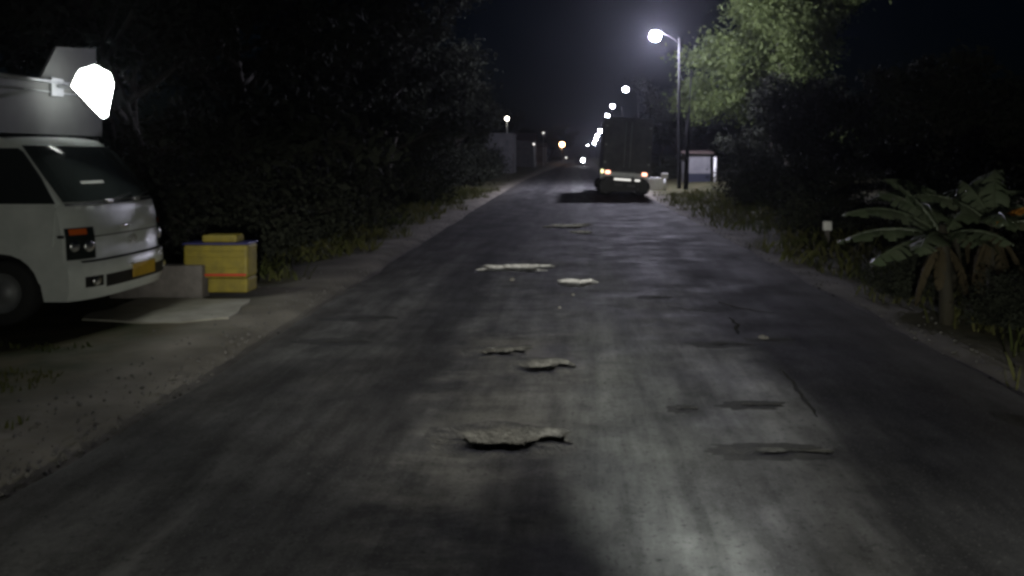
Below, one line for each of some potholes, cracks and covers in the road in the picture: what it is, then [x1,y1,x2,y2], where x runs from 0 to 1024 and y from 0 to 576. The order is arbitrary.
pothole [703,442,842,461]
pothole [423,421,580,459]
pothole [665,404,698,413]
crack [782,370,818,417]
crack [668,302,775,334]
pothole [505,357,576,378]
pothole [714,400,786,410]
pothole [459,345,534,359]
